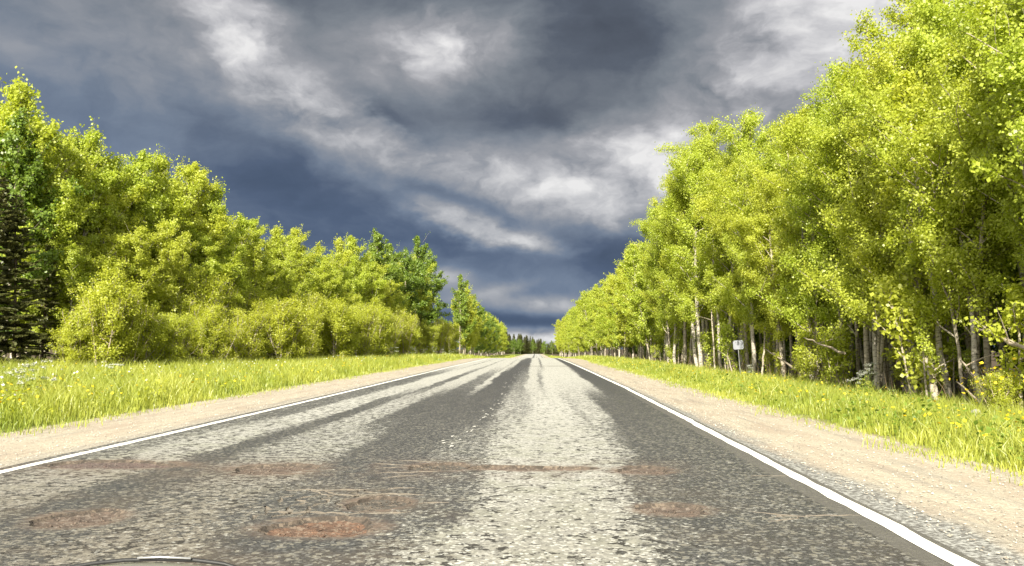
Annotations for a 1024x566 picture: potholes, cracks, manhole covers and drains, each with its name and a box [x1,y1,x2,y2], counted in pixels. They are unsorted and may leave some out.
pothole [634,503,708,517]
pothole [29,508,126,528]
pothole [344,496,412,513]
pothole [615,466,668,475]
pothole [44,460,177,469]
pothole [233,464,323,475]
pothole [258,515,374,538]
